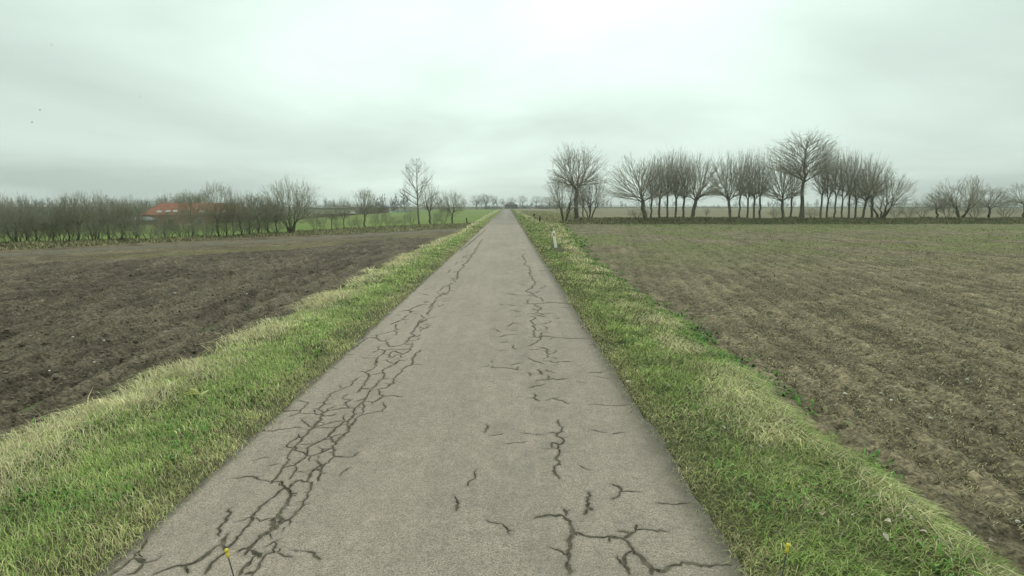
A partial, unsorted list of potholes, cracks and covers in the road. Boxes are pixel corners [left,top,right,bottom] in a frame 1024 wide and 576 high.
crack [534,484,734,575]
crack [484,249,599,479]
crack [110,240,482,576]
